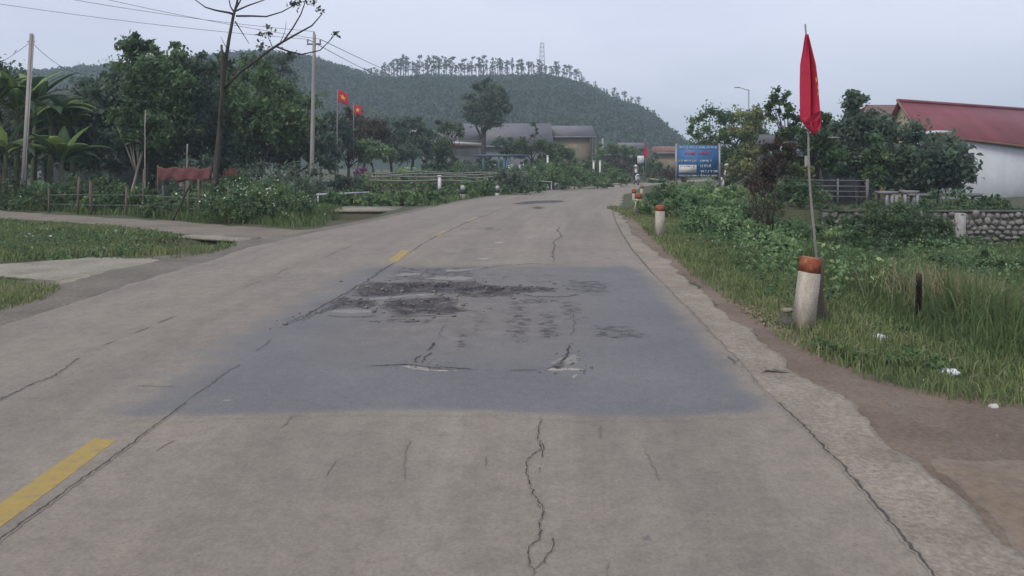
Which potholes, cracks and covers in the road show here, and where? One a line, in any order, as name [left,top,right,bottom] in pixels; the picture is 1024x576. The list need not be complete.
crack [403,440,411,481]
crack [326,227,652,371]
crack [524,413,555,576]
pothole [380,296,475,316]
pothole [354,281,559,297]
crack [643,449,659,479]
